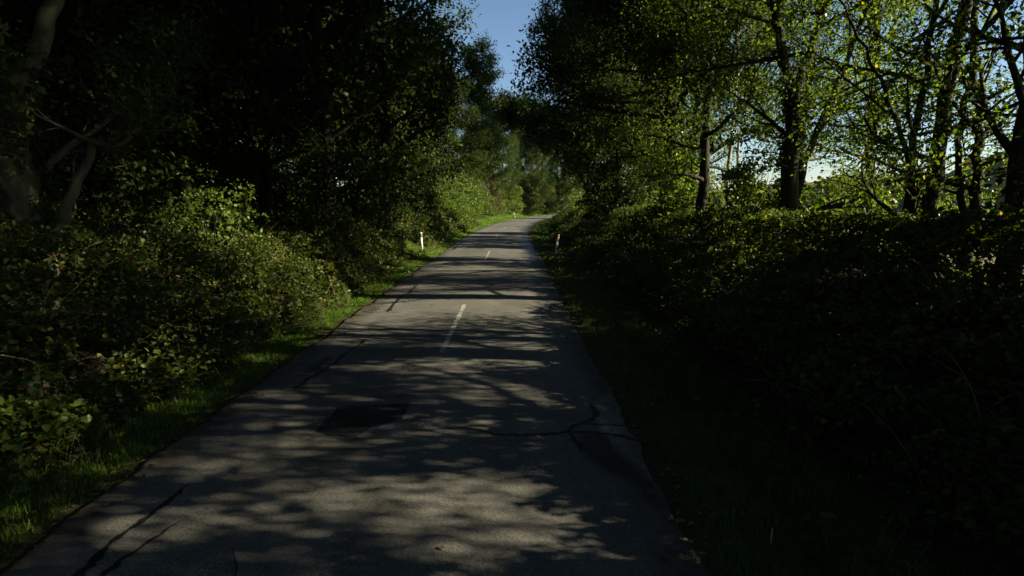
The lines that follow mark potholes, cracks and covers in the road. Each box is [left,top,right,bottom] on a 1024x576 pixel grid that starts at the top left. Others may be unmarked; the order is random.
crack [387,284,418,312]
crack [414,402,647,451]
crack [292,333,375,390]
